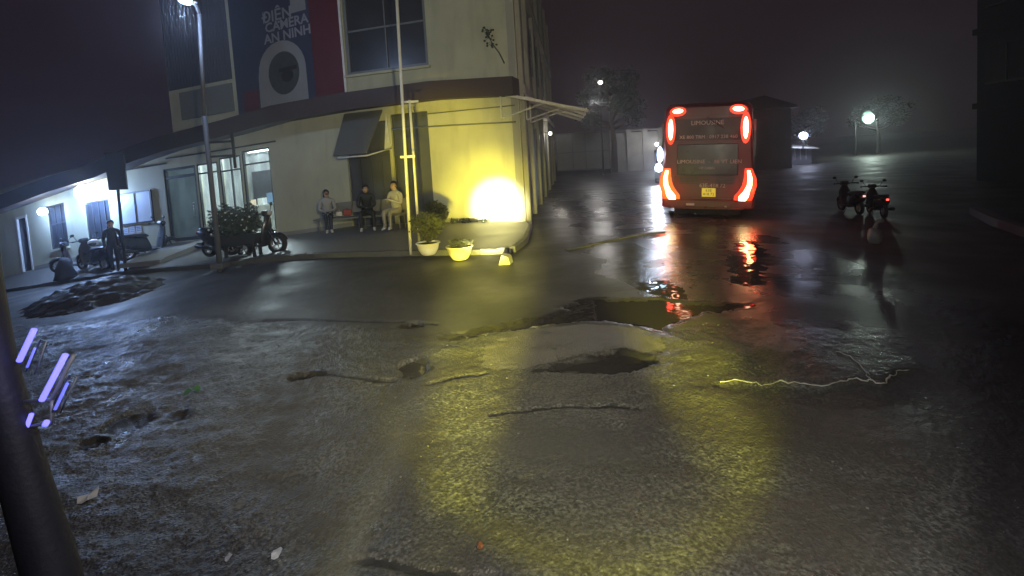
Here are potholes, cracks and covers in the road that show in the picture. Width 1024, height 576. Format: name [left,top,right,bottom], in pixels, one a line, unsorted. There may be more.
pothole [531,348,660,375]
pothole [398,358,435,379]
pothole [162,407,197,421]
crack [426,374,486,386]
crack [720,351,908,387]
pothole [79,435,113,450]
crack [295,373,398,383]
pothole [438,296,760,341]
crack [491,405,638,416]
